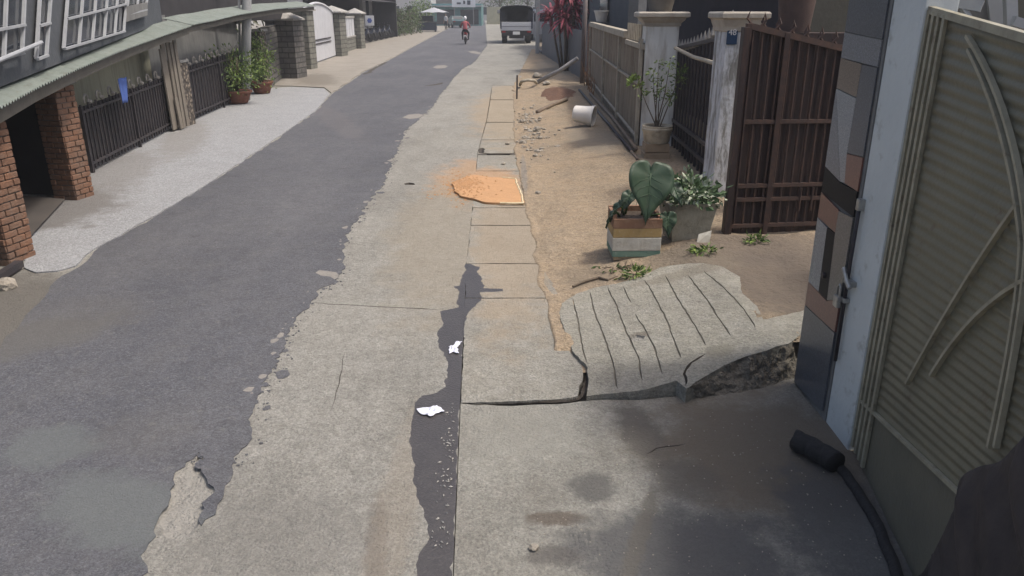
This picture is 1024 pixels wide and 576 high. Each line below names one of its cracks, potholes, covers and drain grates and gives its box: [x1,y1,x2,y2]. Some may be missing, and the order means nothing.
crack [683,354,705,385]
crack [462,372,588,406]
